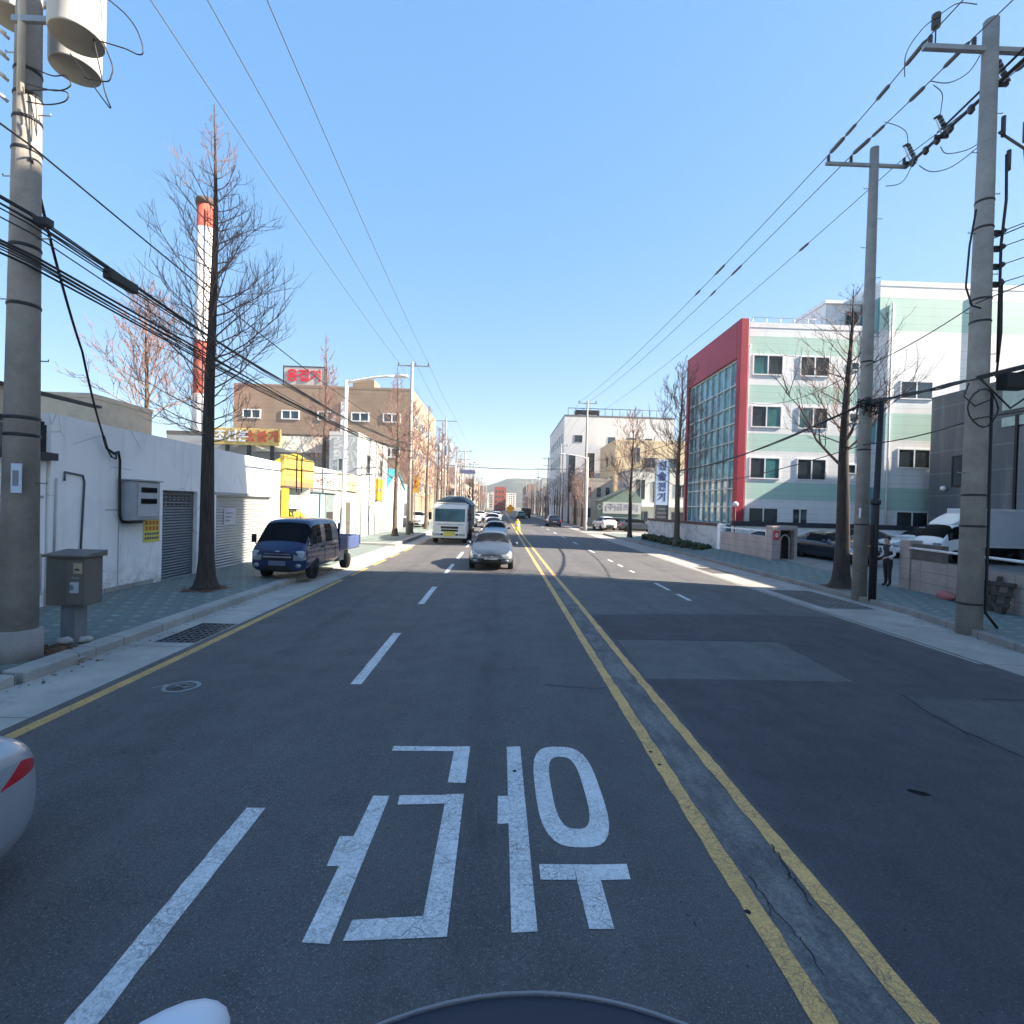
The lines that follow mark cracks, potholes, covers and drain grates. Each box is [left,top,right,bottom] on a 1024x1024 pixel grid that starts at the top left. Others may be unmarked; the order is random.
drain grate [154,623,237,643]
drain grate [769,590,877,610]
manhole cover [153,681,201,692]
crack [749,844,824,974]
crack [902,694,1023,757]
